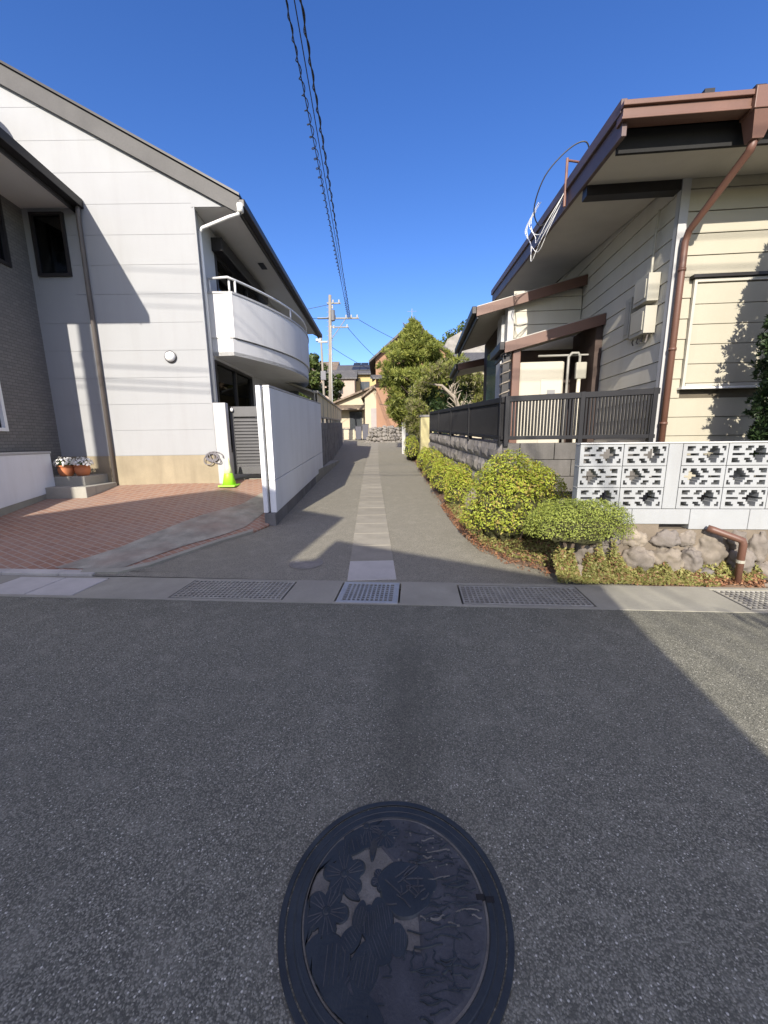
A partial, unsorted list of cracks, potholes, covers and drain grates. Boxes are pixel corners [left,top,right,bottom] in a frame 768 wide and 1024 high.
manhole cover [277,801,515,1024]
drain grate [171,580,295,600]
drain grate [713,590,768,611]
manhole cover [289,559,323,570]
drain grate [458,586,594,607]
drain grate [336,582,400,604]
